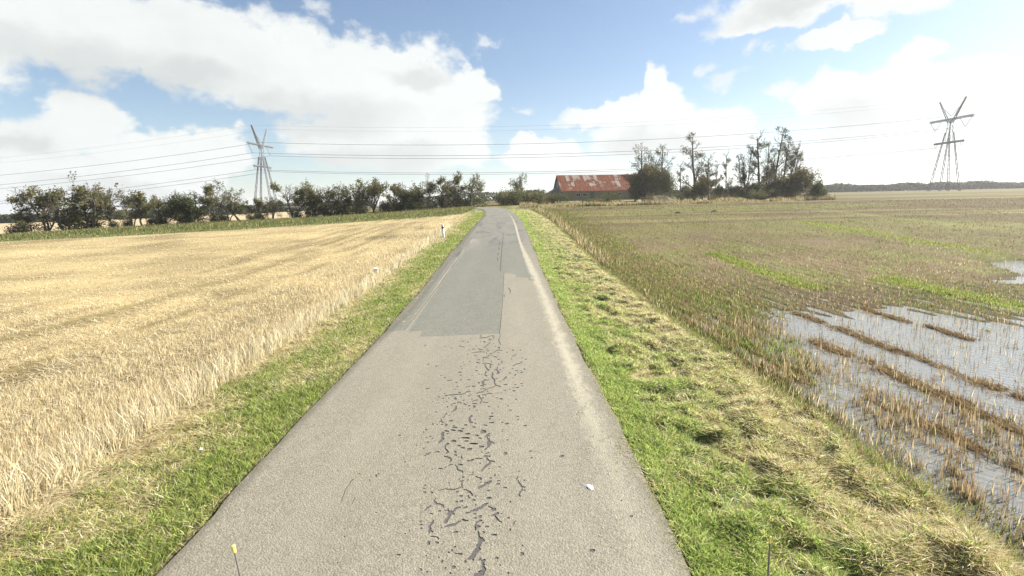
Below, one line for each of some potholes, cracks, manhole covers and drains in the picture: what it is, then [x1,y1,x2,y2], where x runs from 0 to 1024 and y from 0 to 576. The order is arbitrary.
crack [424,335,526,576]
